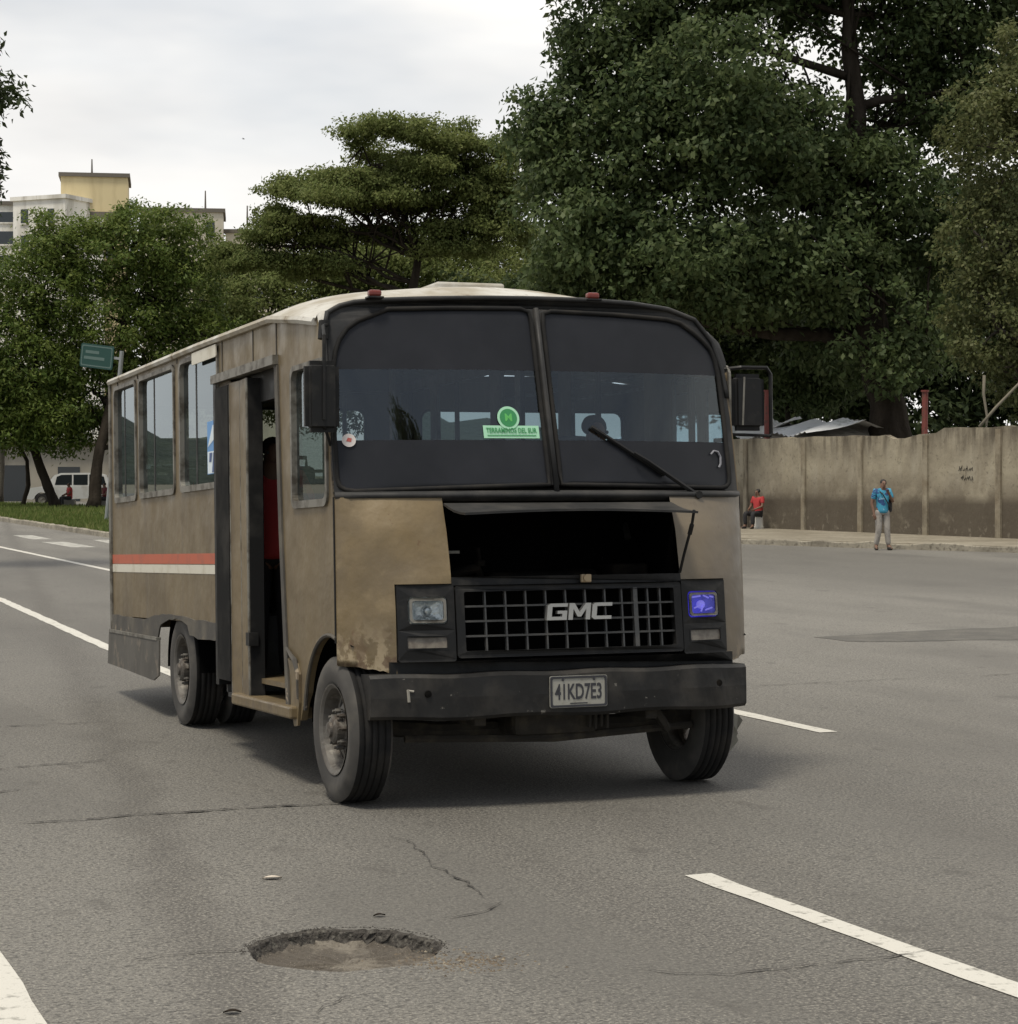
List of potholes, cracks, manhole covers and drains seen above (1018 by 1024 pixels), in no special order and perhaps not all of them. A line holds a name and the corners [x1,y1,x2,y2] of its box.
crack [629,946,967,974]
pothole [247,928,444,972]
crack [19,801,361,823]
crack [391,836,502,918]
